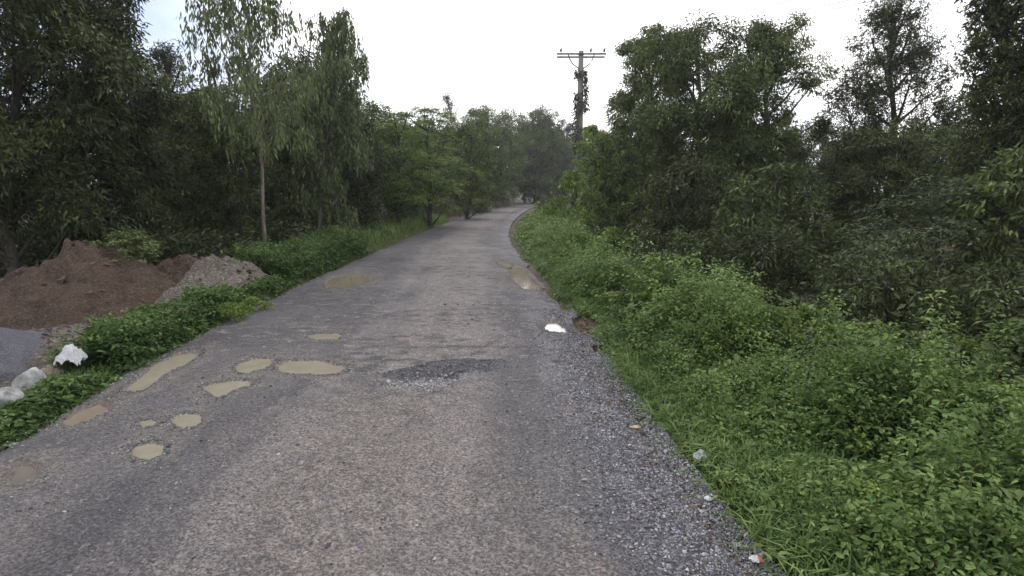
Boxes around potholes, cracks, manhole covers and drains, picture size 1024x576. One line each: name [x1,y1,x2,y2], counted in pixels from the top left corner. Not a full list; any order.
pothole [9,461,42,485]
pothole [123,349,201,392]
pothole [202,379,252,397]
pothole [507,265,541,290]
pothole [275,359,347,375]
pothole [380,358,509,382]
pothole [235,357,274,373]
pothole [58,399,116,426]
pothole [131,442,165,460]
pothole [324,274,372,289]
pothole [170,413,203,428]
